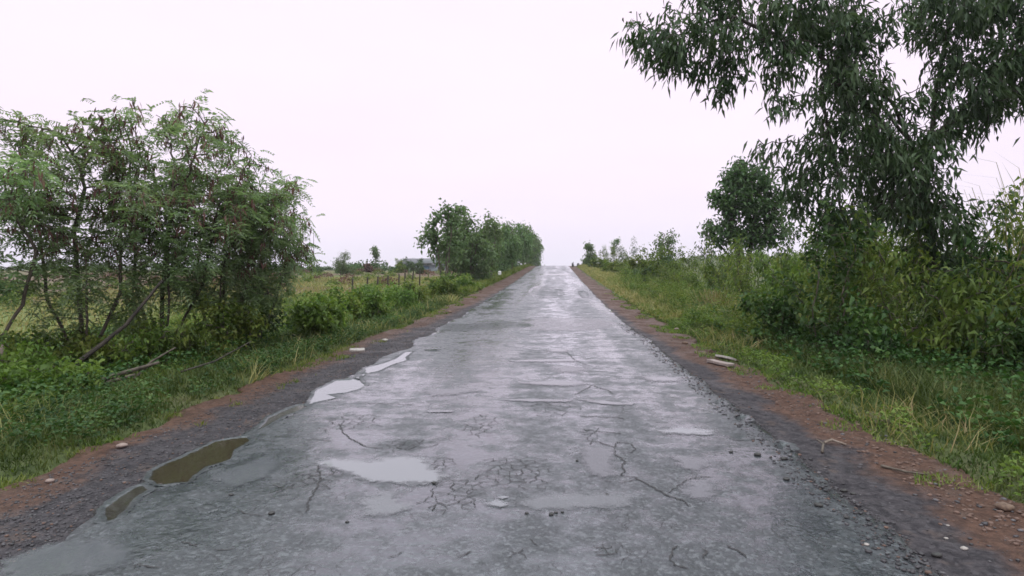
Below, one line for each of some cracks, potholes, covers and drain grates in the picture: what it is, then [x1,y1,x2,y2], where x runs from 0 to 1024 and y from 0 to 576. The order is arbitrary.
pothole [351,351,414,379]
pothole [304,374,369,406]
pothole [142,435,257,486]
crack [522,385,713,506]
crack [241,466,344,515]
pothole [93,482,158,524]
crack [319,403,553,515]
